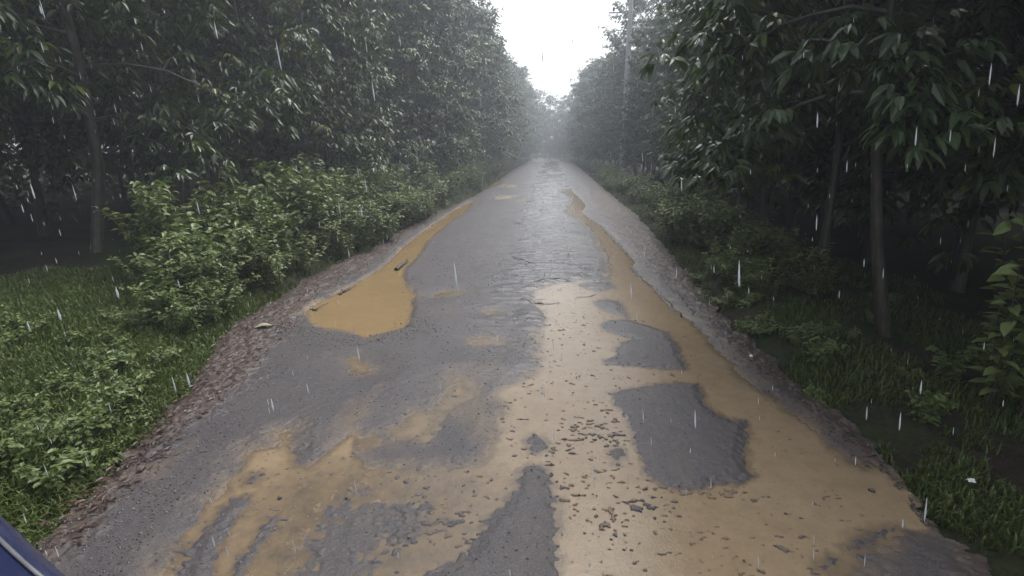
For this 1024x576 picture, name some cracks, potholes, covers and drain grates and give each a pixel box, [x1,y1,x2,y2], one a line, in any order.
crack [512,256,593,297]
pothole [152,188,937,576]
